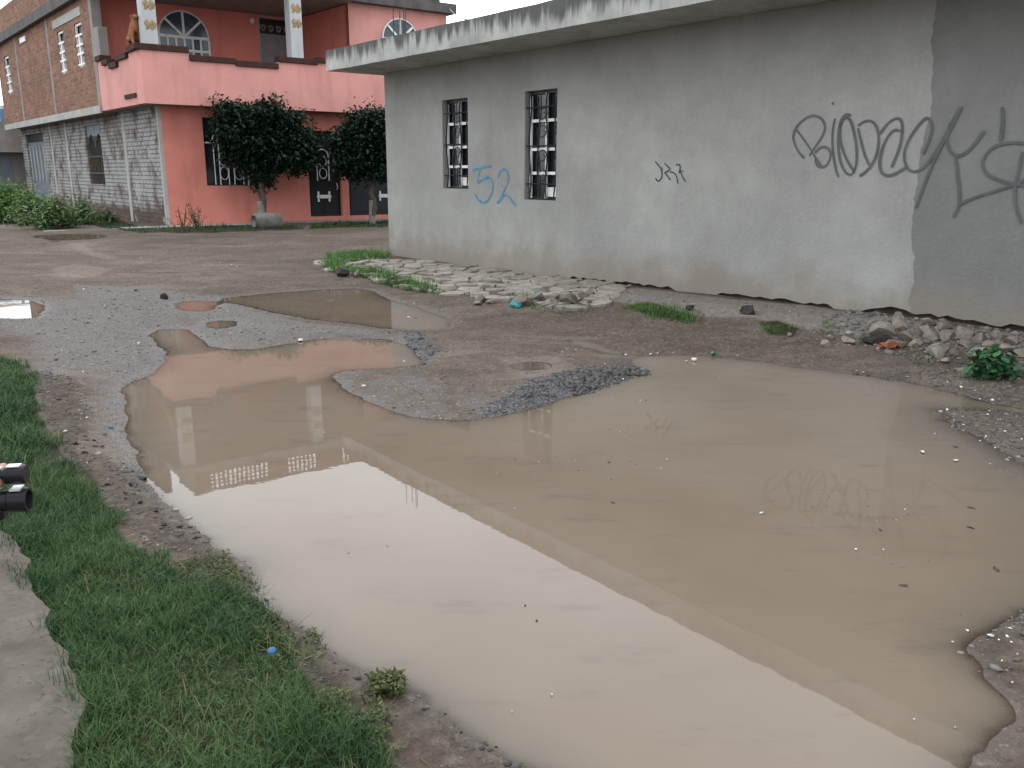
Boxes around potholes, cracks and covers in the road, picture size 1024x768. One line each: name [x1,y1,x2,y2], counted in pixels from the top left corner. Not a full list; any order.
pothole [176,301,221,312]
pothole [208,321,235,329]
pothole [219,289,450,331]
